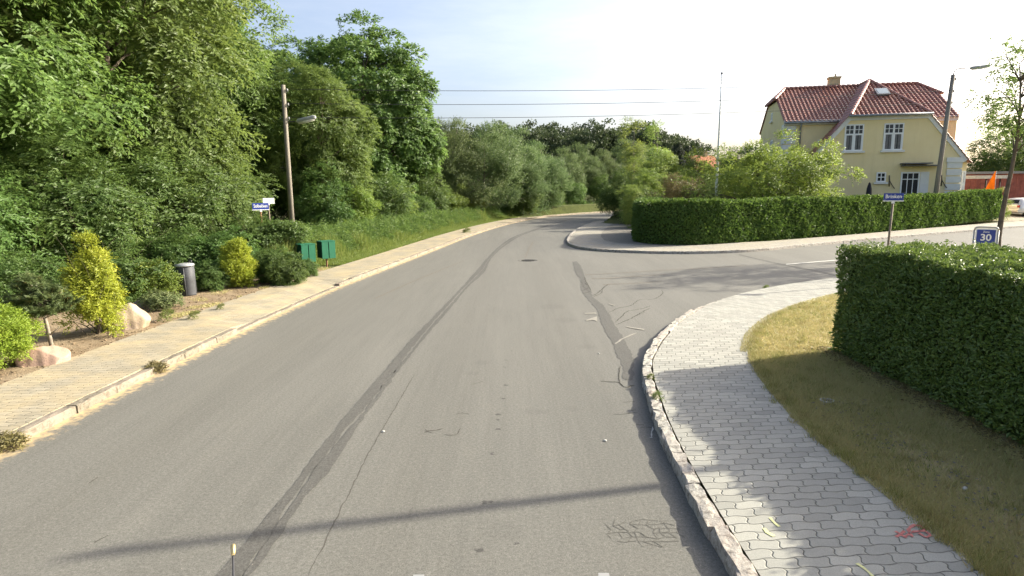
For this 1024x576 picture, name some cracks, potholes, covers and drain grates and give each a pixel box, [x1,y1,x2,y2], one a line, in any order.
crack [604,519,685,547]
crack [582,277,663,325]
crack [308,376,414,575]
